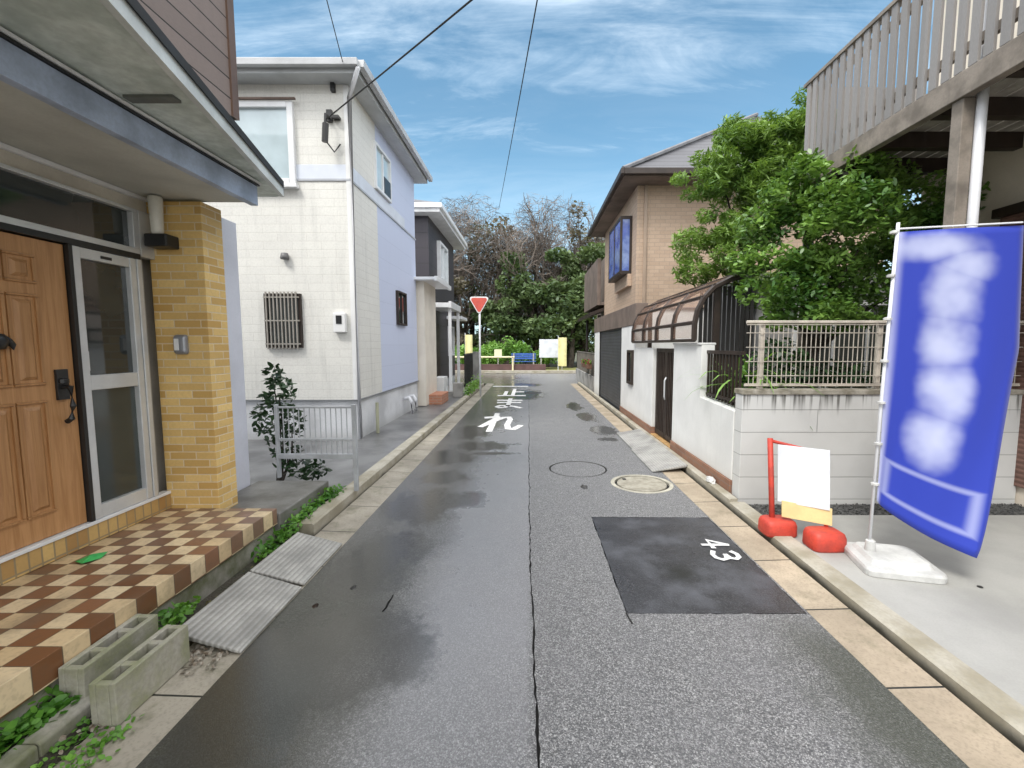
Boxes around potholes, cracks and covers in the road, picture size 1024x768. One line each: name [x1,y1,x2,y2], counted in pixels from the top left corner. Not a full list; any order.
manhole cover [549,462,607,477]
manhole cover [611,474,674,494]
crack [528,432,541,768]
